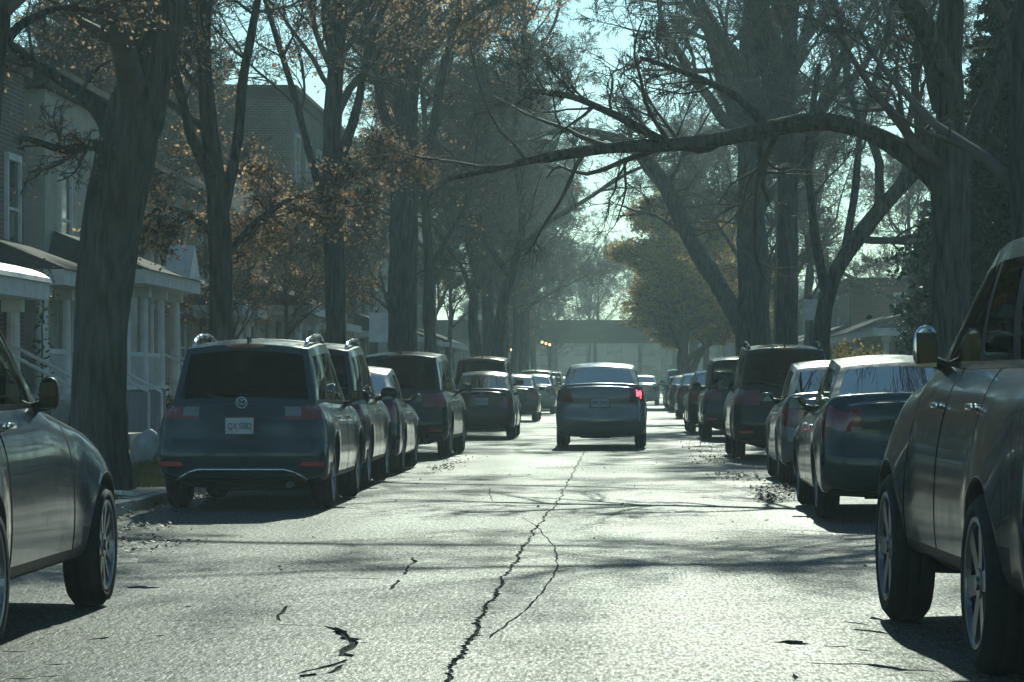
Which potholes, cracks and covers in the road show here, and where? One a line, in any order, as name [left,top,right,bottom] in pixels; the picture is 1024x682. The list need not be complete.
crack [444,449,586,682]
crack [288,557,418,590]
crack [297,626,368,678]
crack [272,606,288,625]
